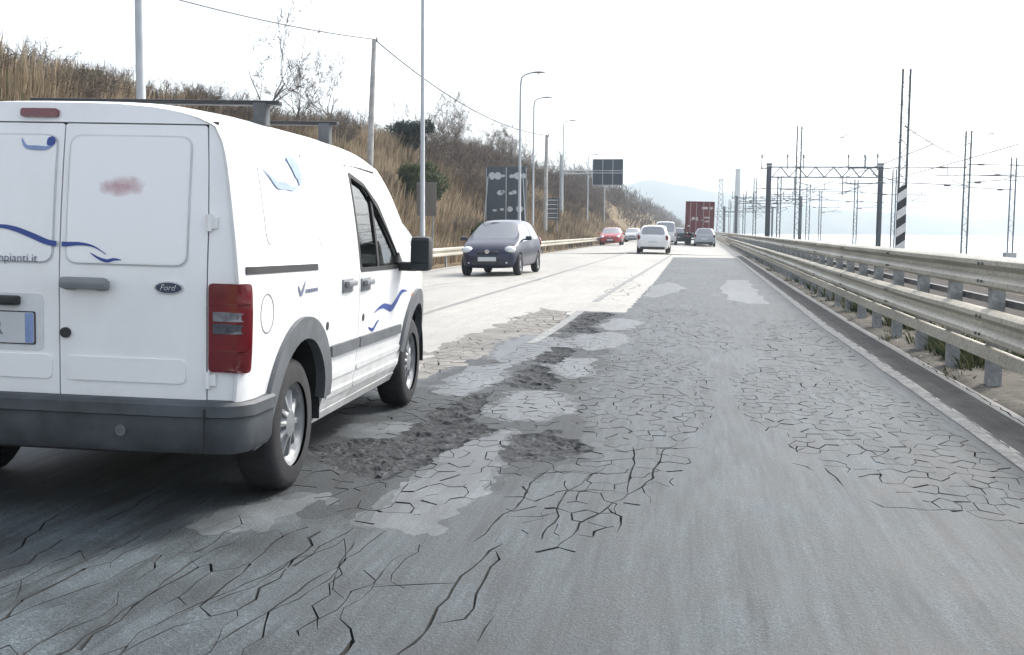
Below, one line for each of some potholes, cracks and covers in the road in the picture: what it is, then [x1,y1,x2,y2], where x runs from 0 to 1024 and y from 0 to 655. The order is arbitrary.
pothole [499,365,562,390]
crack [751,320,869,371]
pothole [497,430,596,463]
pothole [306,393,499,482]
crack [627,309,737,352]
pothole [530,347,577,365]
crack [0,331,716,655]
pothole [560,312,615,334]
crack [729,366,1024,524]
